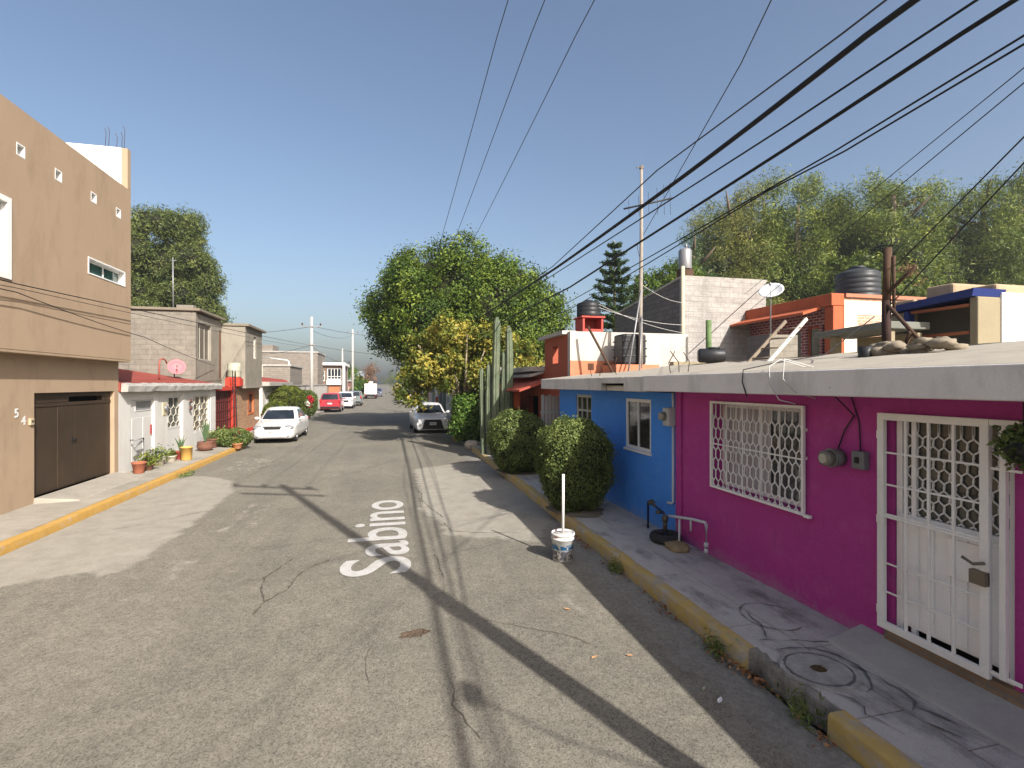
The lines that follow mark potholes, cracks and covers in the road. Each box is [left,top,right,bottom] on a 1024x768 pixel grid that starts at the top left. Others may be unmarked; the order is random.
crack [253,558,331,615]
crack [416,489,516,577]
manhole cover [778,650,862,692]
crack [739,603,961,737]
crack [450,681,480,738]
